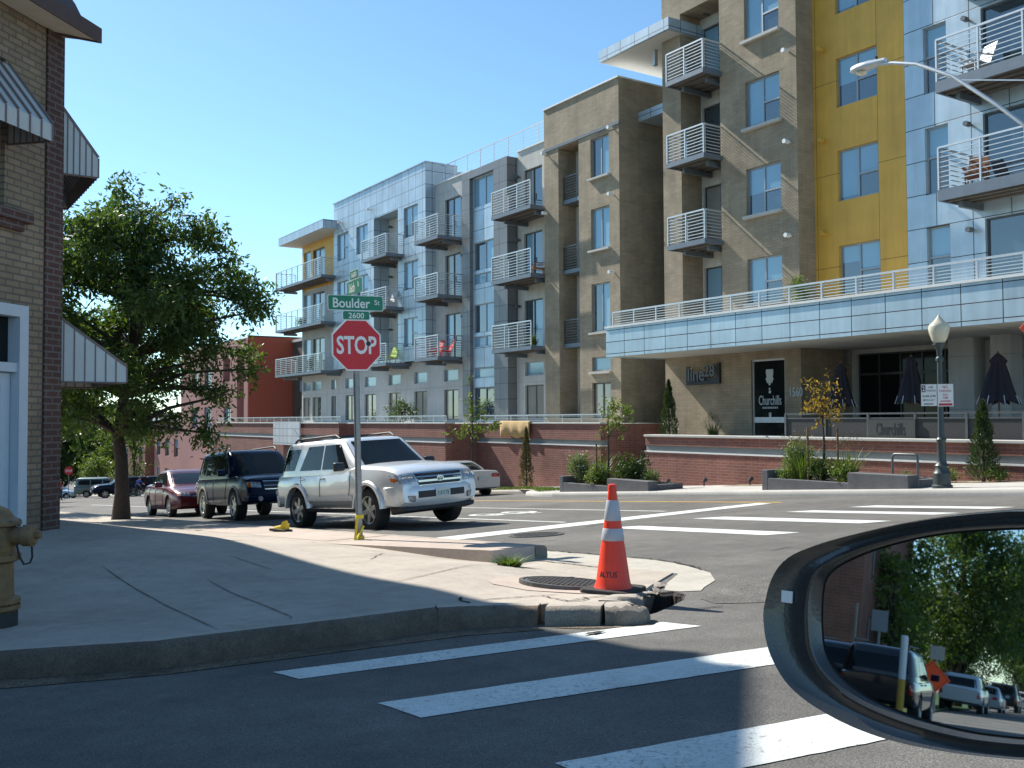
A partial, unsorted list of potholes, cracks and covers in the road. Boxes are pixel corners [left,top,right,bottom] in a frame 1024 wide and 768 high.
manhole cover [519,576,596,590]
